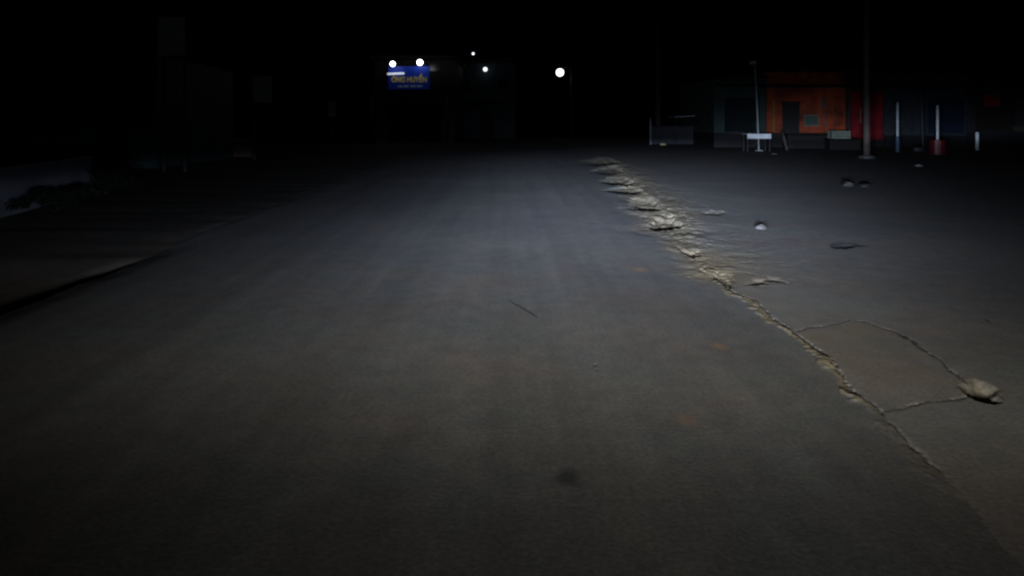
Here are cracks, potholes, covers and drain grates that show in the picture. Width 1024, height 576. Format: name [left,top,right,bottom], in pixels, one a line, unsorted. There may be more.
crack [509,299,538,317]
crack [695,256,965,477]
